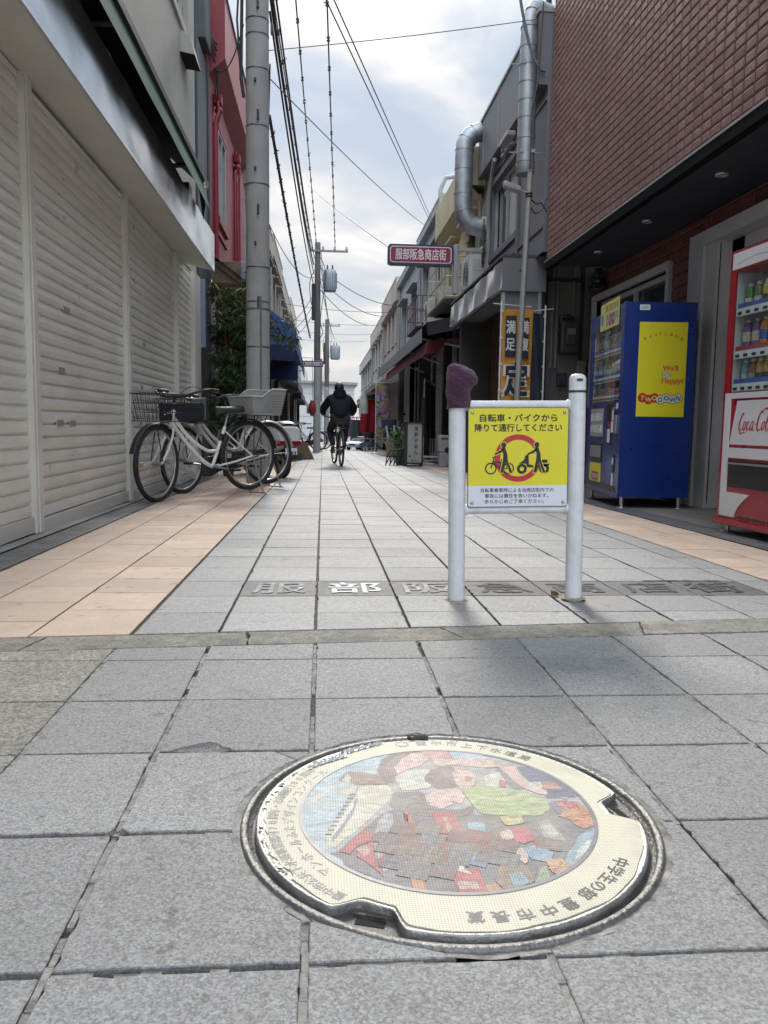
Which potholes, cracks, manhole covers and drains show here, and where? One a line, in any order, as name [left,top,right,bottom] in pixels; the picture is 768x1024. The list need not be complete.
manhole cover [232,732,675,962]
pothole [172,743,232,753]
